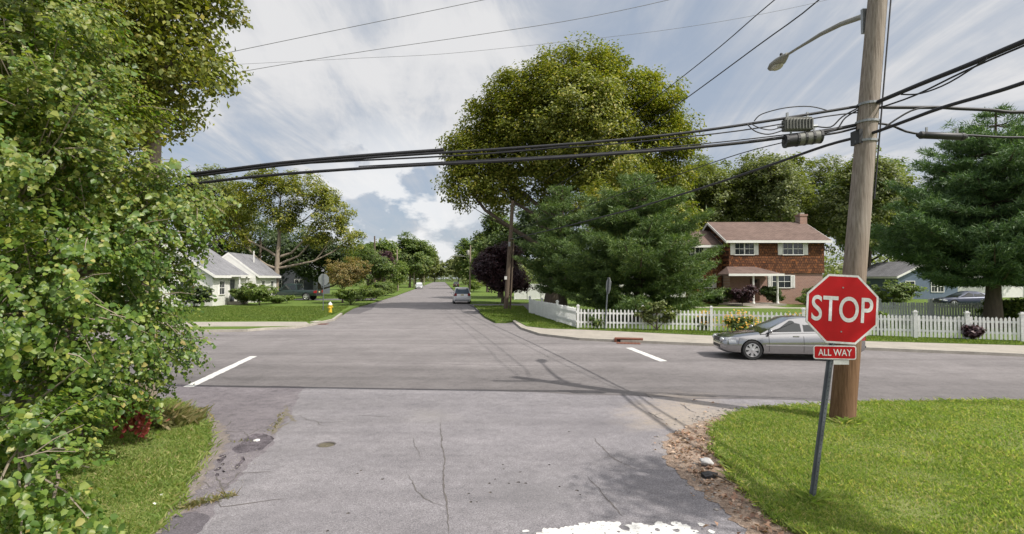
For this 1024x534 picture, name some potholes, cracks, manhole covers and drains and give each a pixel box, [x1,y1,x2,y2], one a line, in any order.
crack [203,472,276,507]
crack [407,422,449,533]
